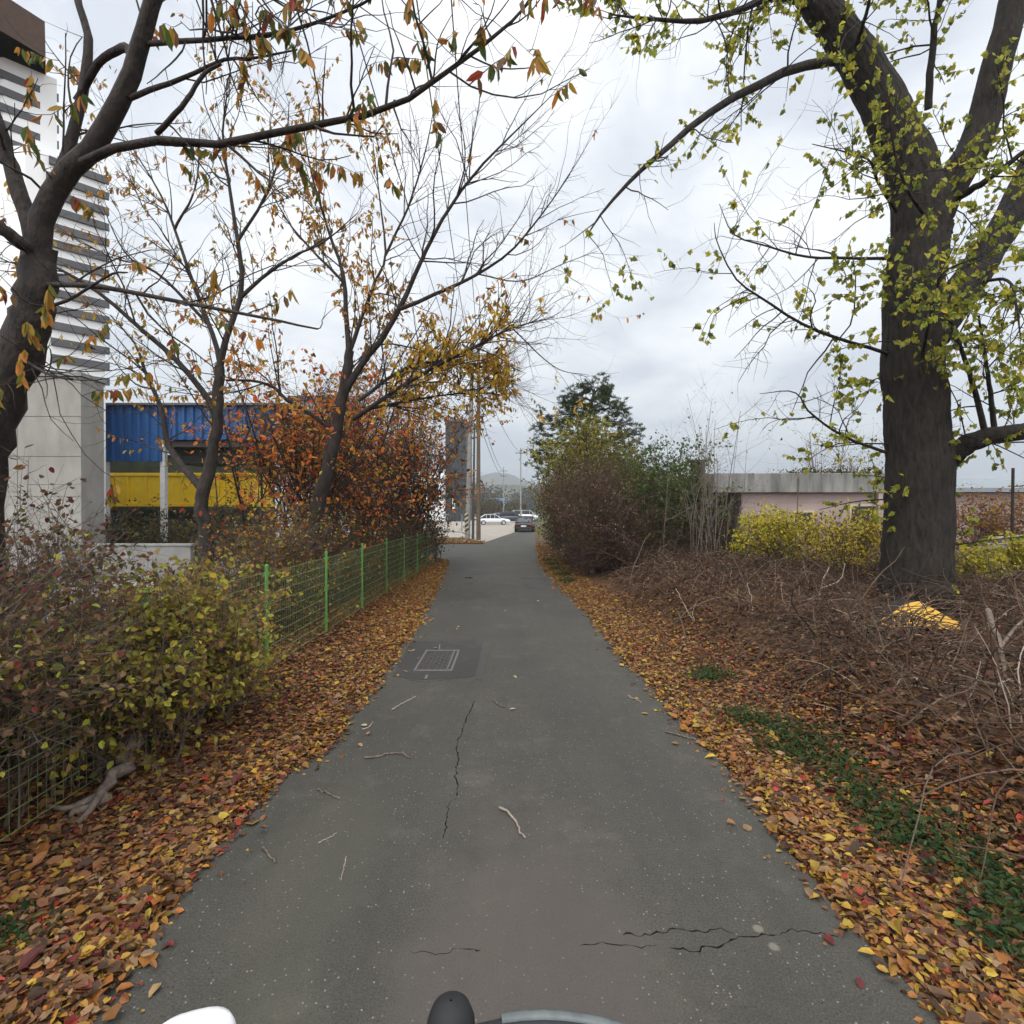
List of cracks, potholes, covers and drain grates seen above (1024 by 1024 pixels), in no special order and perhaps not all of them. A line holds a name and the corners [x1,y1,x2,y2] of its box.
crack [583,928,839,953]
crack [443,701,475,837]
